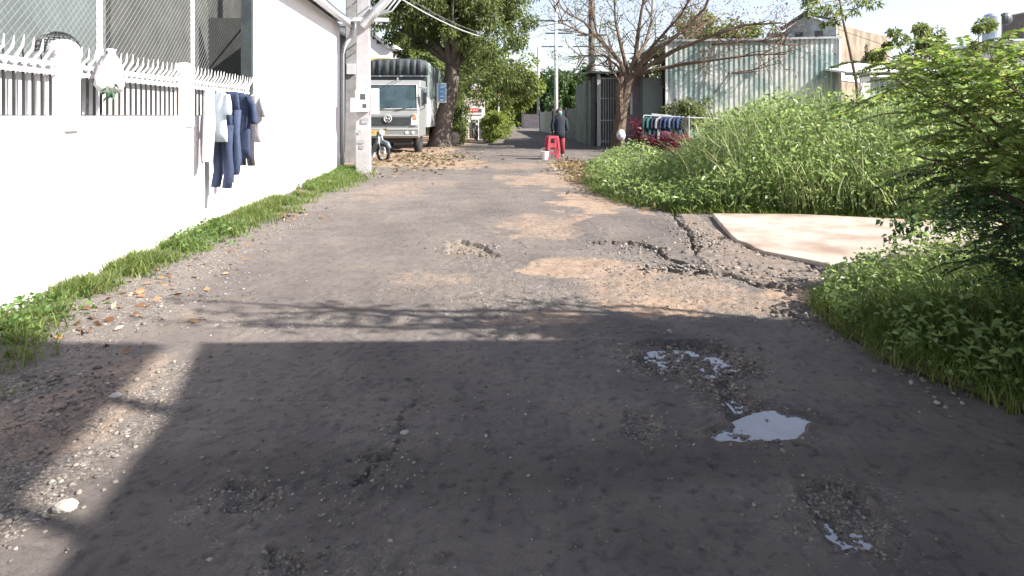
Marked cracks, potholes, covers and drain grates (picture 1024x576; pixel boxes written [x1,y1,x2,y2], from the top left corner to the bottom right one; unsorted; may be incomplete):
pothole [257,542,324,576]
pothole [443,239,501,260]
pothole [701,379,826,444]
crack [345,397,421,487]
pothole [613,408,667,446]
pothole [789,475,894,558]
pothole [629,338,760,383]
pothole [214,477,291,516]
crack [589,211,830,291]
